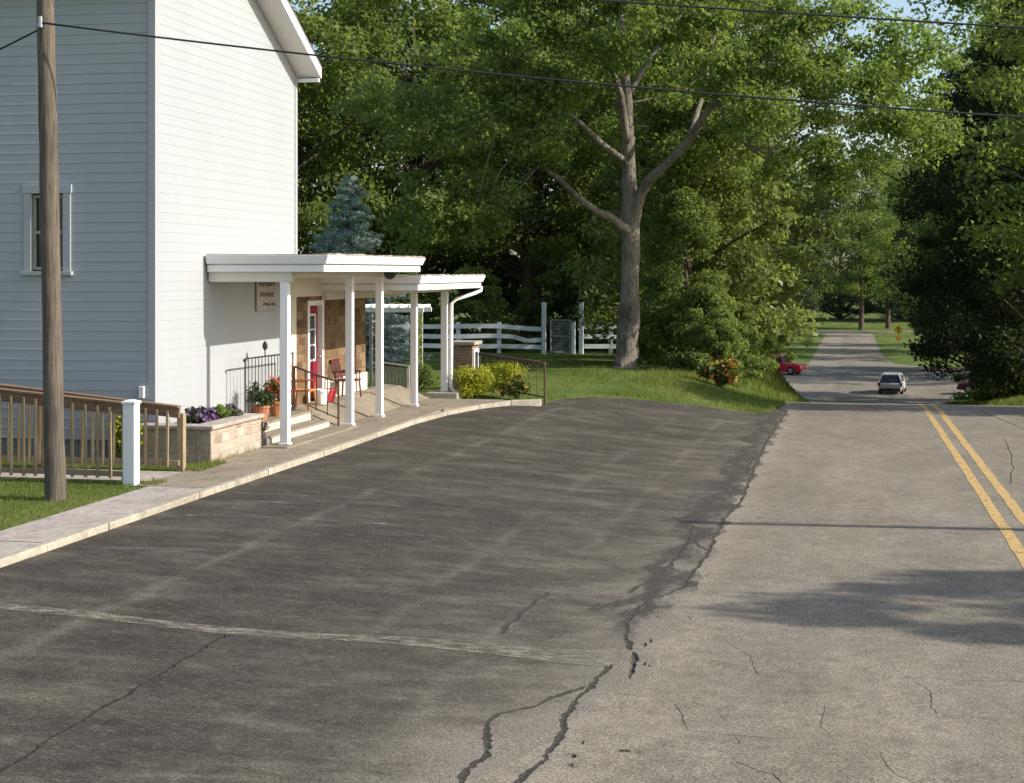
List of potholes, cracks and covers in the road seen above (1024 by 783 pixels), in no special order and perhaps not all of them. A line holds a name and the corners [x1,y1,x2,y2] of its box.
crack [0,410,811,783]
crack [882,677,1012,714]
crack [982,411,1023,484]
